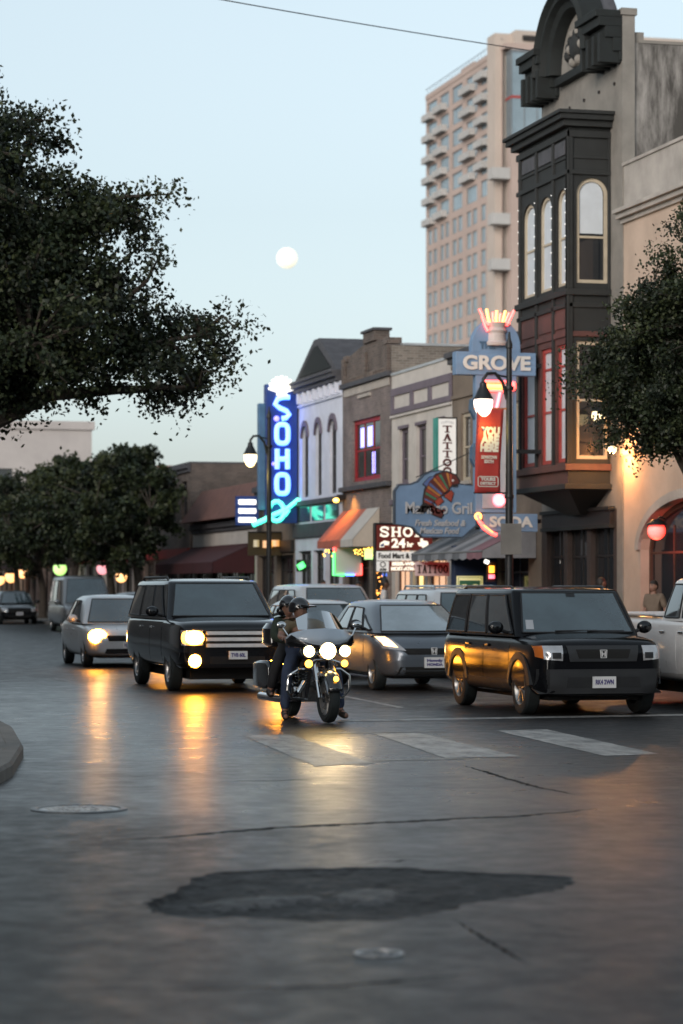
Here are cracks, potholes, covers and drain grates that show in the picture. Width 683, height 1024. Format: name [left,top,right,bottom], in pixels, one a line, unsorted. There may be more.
crack [466,766,587,797]
manhole cover [30,804,128,814]
manhole cover [354,949,404,958]
crack [455,920,528,964]
